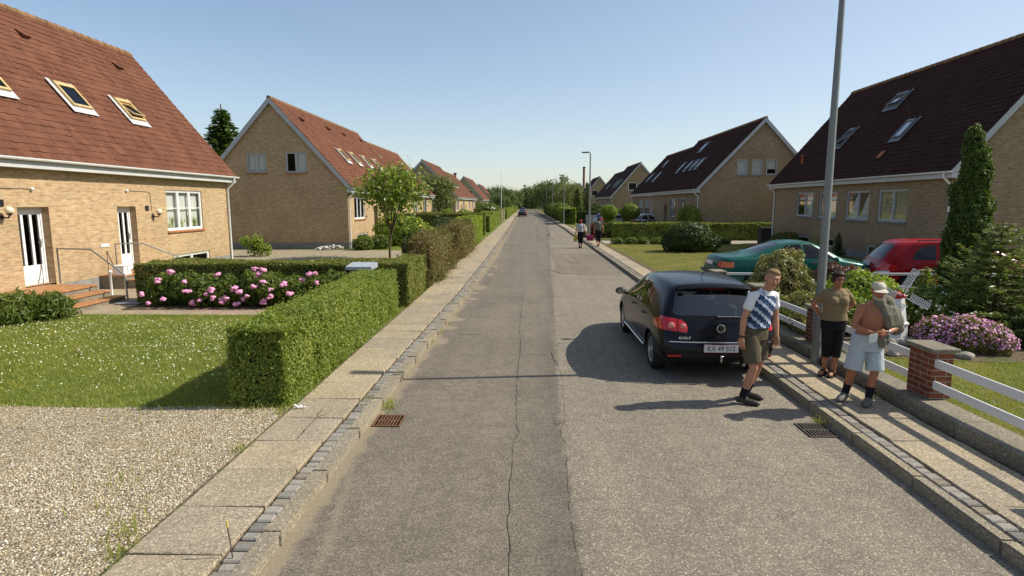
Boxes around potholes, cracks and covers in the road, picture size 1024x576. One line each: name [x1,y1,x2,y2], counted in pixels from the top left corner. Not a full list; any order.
drain grate [794,423,841,438]
drain grate [371,415,406,427]
crack [507,293,524,558]
